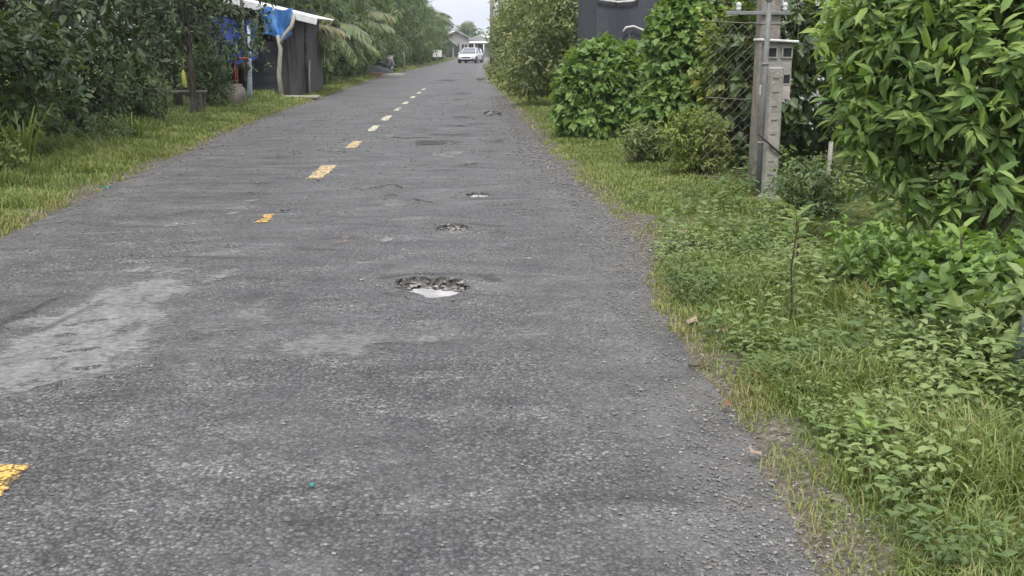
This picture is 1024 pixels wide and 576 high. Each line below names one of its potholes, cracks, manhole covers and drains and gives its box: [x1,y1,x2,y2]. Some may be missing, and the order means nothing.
pothole [421,222,483,234]
pothole [455,191,501,199]
crack [350,184,446,205]
pothole [375,271,489,303]
